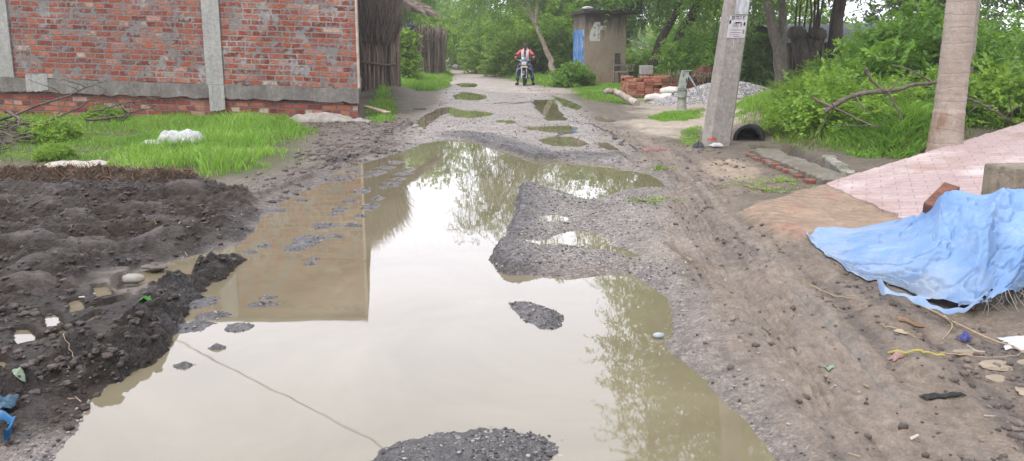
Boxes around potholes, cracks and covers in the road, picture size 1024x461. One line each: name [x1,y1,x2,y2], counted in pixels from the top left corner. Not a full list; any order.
pothole [27,131,813,461]
pothole [518,123,580,133]
pothole [550,94,585,110]
pothole [531,98,570,121]
pothole [452,91,490,101]
pothole [413,105,496,127]
